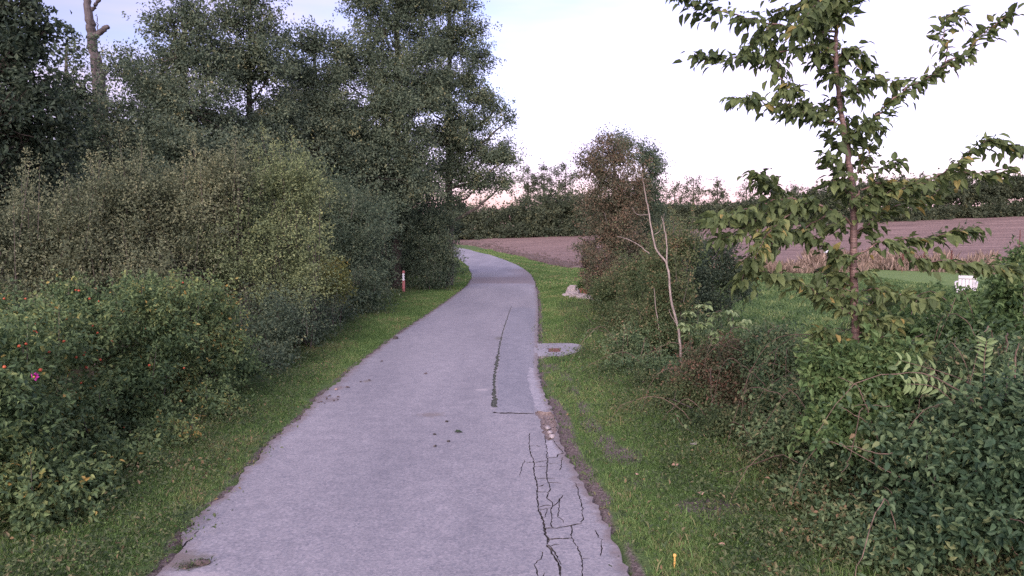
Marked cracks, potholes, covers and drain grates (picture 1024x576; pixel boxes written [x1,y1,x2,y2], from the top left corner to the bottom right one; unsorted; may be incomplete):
crack [519,433,603,576]
